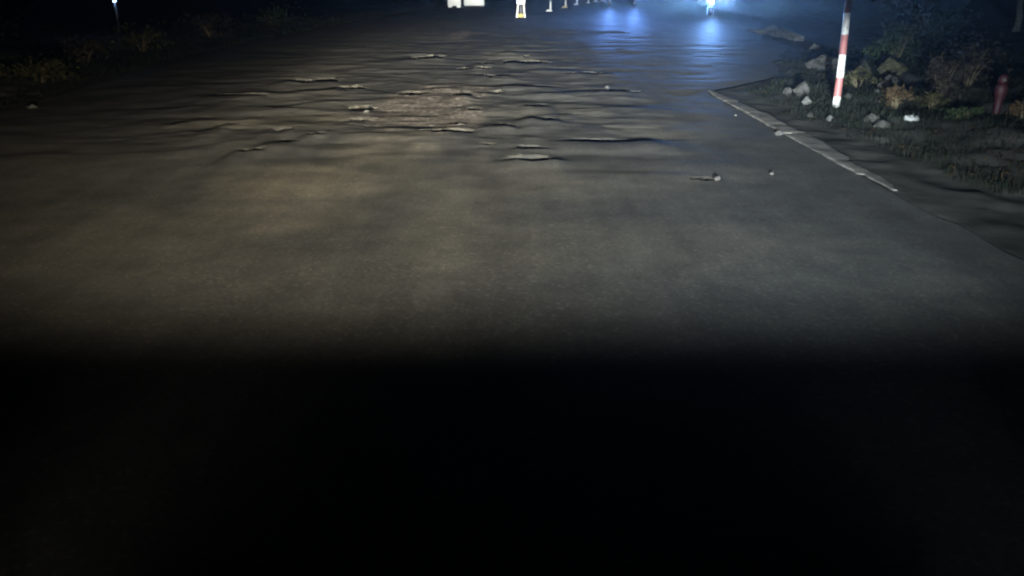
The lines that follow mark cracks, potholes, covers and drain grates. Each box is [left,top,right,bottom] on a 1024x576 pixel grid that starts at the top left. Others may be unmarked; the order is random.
pothole [499,154,565,162]
